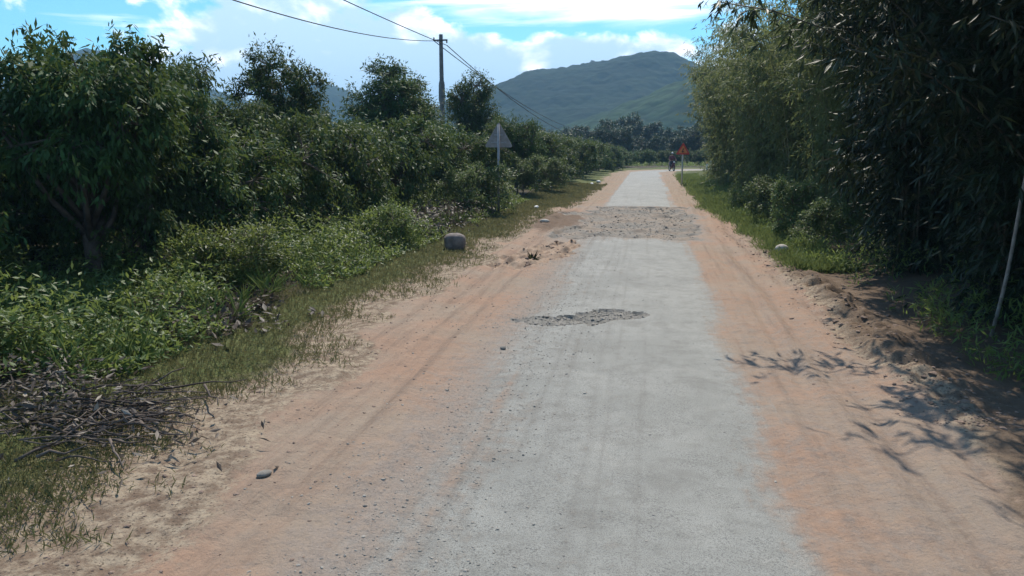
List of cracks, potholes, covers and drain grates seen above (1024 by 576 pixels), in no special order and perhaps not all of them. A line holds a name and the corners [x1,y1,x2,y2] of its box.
pothole [549,206,703,241]
pothole [505,308,650,326]
